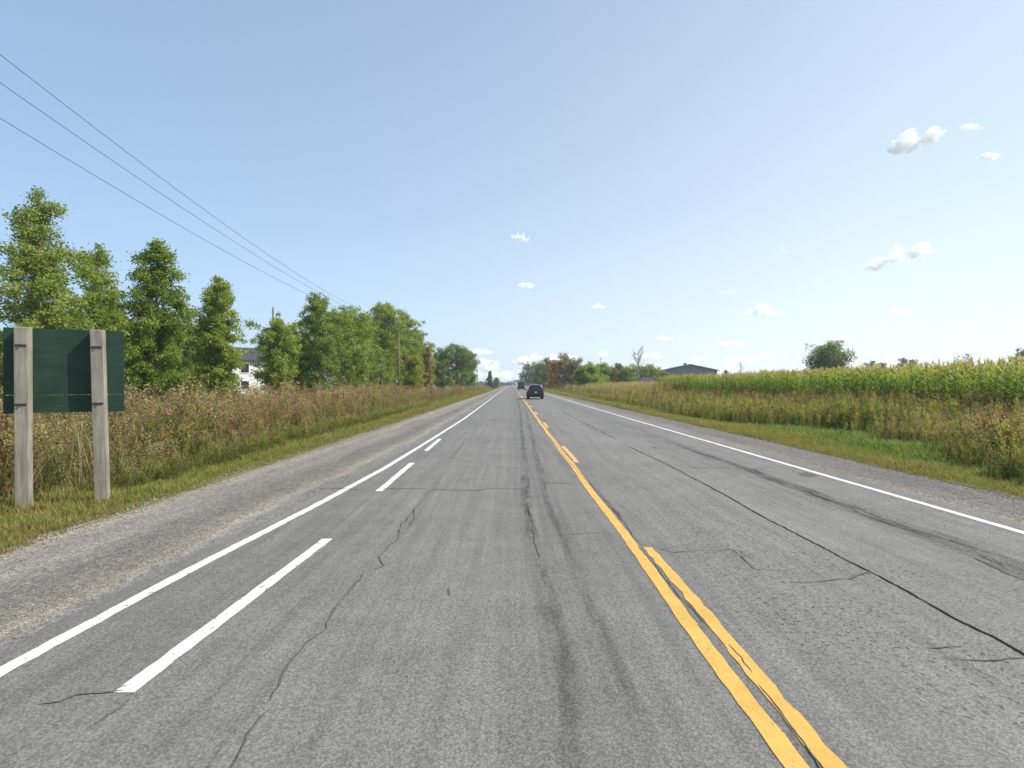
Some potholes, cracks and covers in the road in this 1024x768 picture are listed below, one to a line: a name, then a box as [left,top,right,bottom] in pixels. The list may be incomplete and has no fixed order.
crack [539,435,867,768]
crack [207,488,518,768]
crack [932,645,1024,661]
crack [39,690,128,730]
